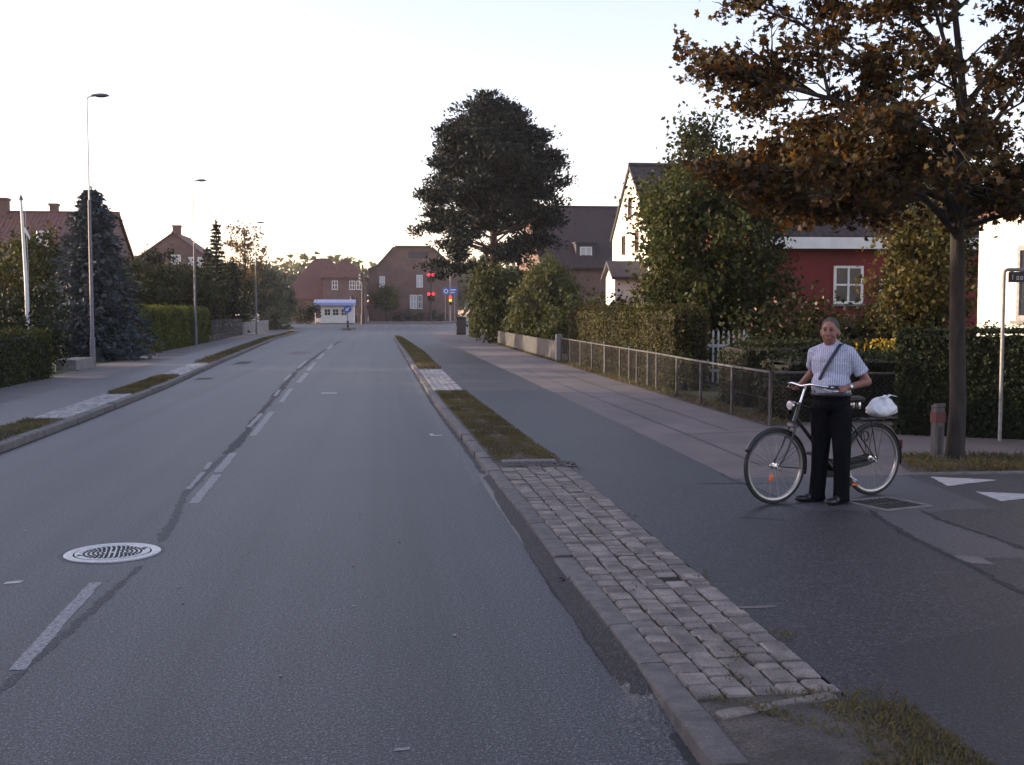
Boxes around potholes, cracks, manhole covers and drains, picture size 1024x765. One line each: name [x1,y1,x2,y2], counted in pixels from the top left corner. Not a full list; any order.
manhole cover [63,543,161,563]
drain grate [847,496,933,511]
